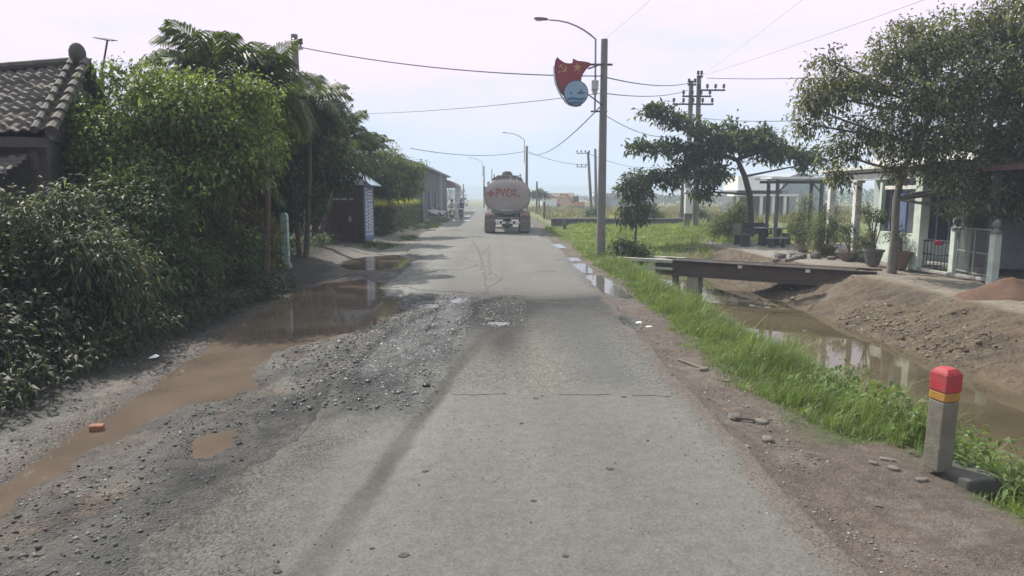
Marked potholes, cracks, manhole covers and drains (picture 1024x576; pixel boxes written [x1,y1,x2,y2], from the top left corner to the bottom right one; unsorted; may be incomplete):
pothole [472,296,524,331]
pothole [348,293,474,388]
crack [384,240,585,308]
